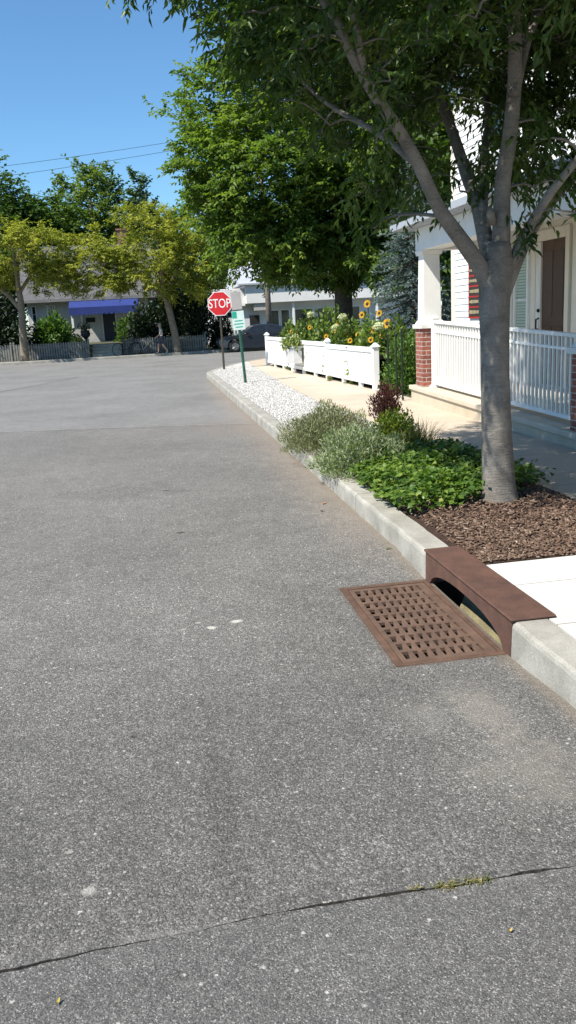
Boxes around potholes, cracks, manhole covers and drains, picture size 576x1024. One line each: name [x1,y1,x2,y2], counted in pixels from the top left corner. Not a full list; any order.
crack [0,866,574,973]
drain grate [340,546,556,667]
